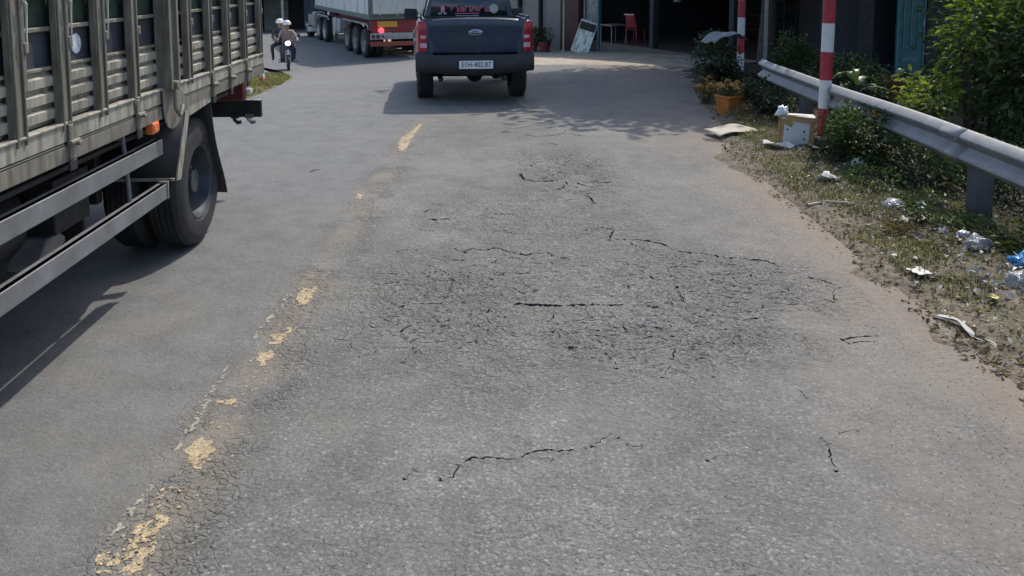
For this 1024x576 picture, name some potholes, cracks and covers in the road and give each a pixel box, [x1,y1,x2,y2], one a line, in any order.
crack [399,469,418,480]
crack [334,125,878,378]
crack [817,427,859,471]
crack [440,434,641,483]
